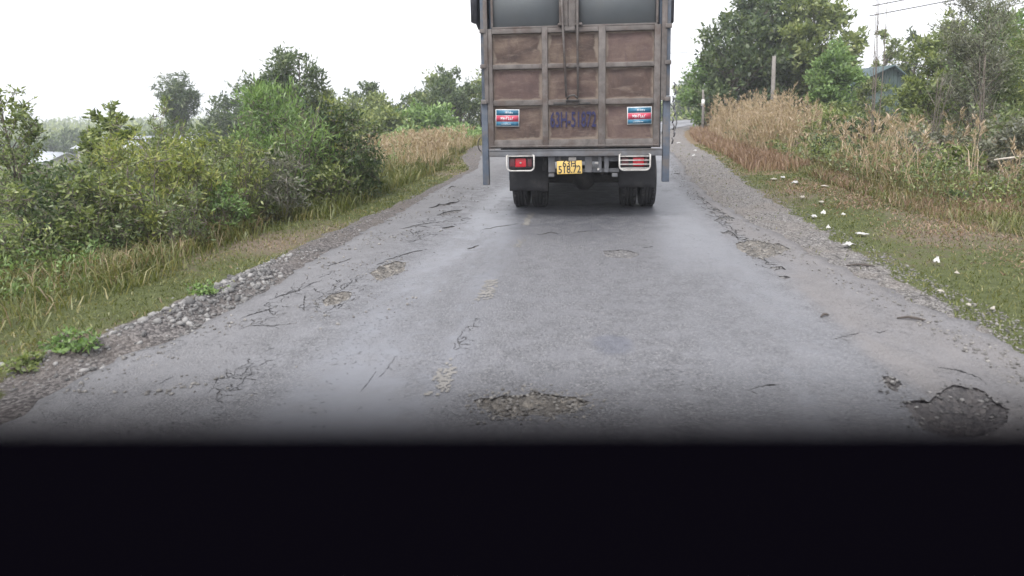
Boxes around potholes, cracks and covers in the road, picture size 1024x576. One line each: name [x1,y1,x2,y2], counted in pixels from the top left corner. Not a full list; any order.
pothole [603,249,640,259]
crack [208,348,273,402]
pothole [875,372,910,398]
crack [240,213,469,329]
pothole [736,238,795,260]
pothole [889,378,1009,401]
pothole [362,260,408,282]
crack [453,318,481,350]
pothole [309,289,352,308]
